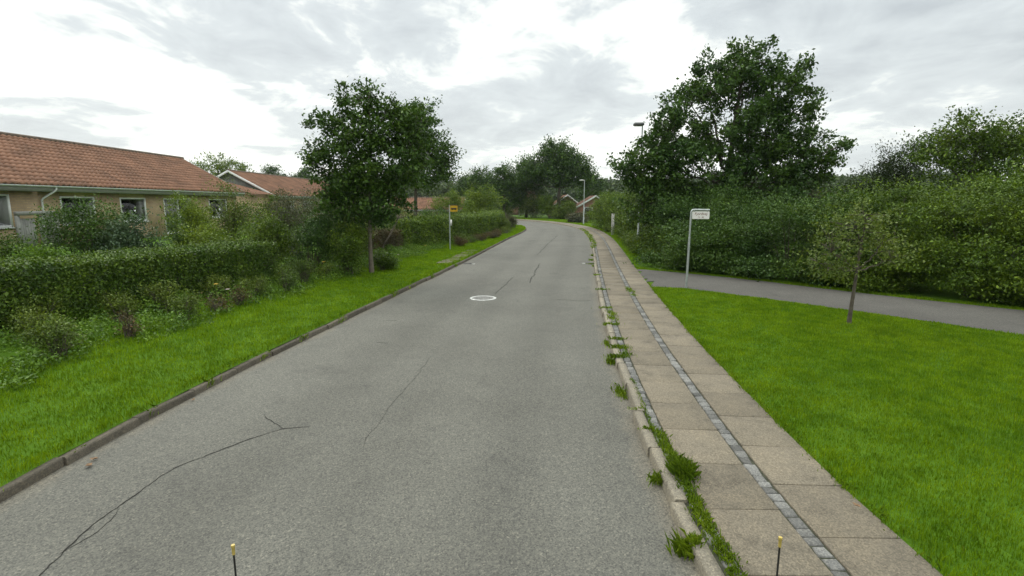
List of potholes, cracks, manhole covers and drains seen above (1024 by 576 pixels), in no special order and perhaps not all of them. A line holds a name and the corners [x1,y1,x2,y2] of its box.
crack [39,416,310,576]
